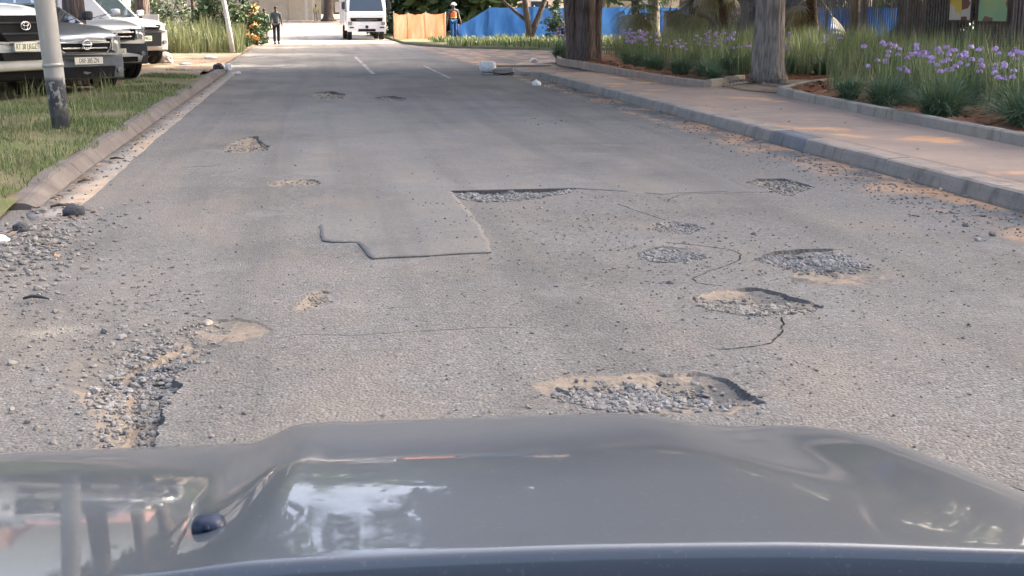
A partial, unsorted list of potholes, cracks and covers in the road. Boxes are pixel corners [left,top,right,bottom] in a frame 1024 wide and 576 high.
pothole [745,179,815,196]
crack [667,242,742,286]
pothole [55,318,274,449]
crack [618,192,747,220]
pothole [267,179,321,187]
pothole [450,189,575,203]
crack [719,317,785,350]
pothole [295,289,331,311]
pothole [532,372,766,414]
pothole [309,91,346,100]
pothole [645,221,706,235]
pothole [690,287,824,317]
